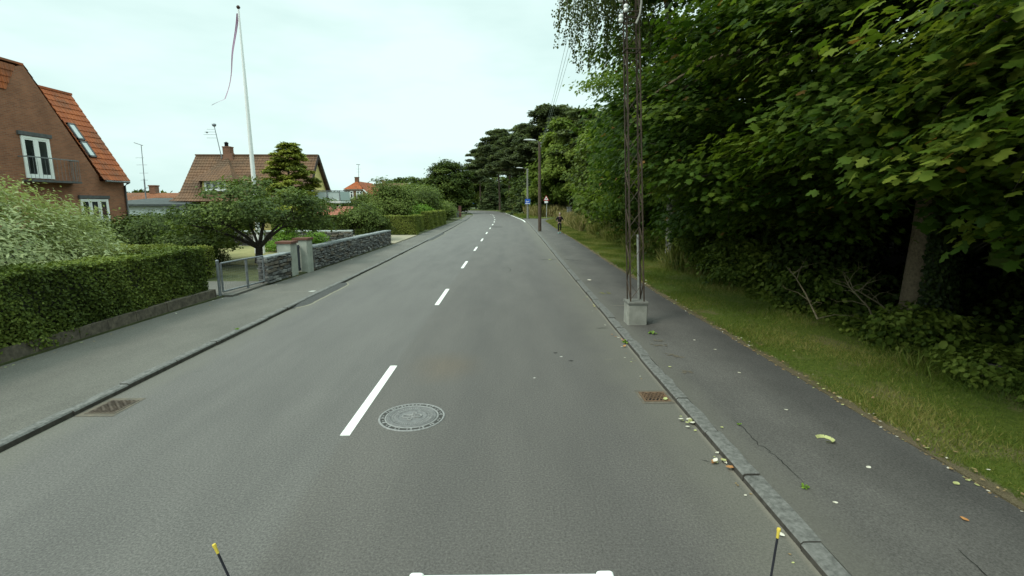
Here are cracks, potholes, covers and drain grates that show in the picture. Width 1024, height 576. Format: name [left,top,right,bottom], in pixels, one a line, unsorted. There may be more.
drain grate [84,400,139,414]
drain grate [638,392,671,402]
manhole cover [378,403,445,432]
